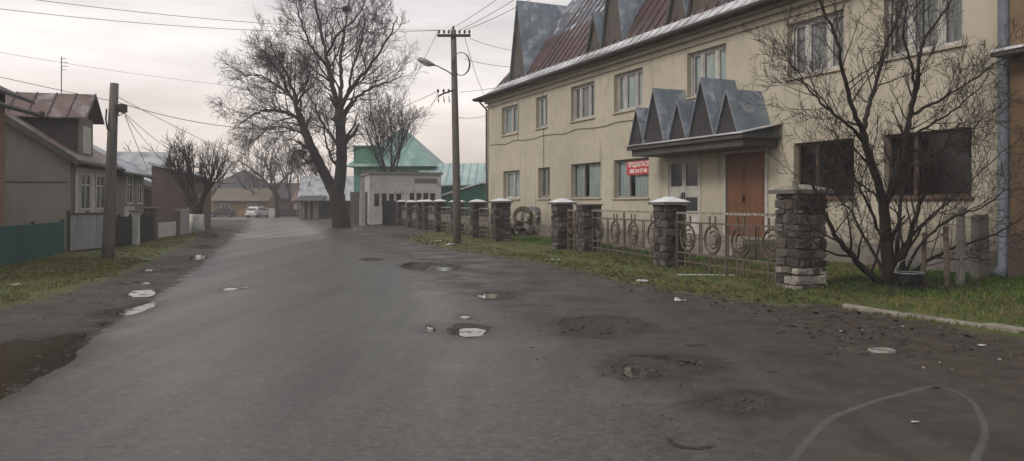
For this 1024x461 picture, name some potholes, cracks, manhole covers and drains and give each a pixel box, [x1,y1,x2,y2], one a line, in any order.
pothole [477,292,517,301]
pothole [446,323,493,338]
crack [666,438,716,449]
pothole [399,262,463,271]
pothole [701,394,775,413]
pothole [610,355,711,378]
pothole [558,316,642,337]
